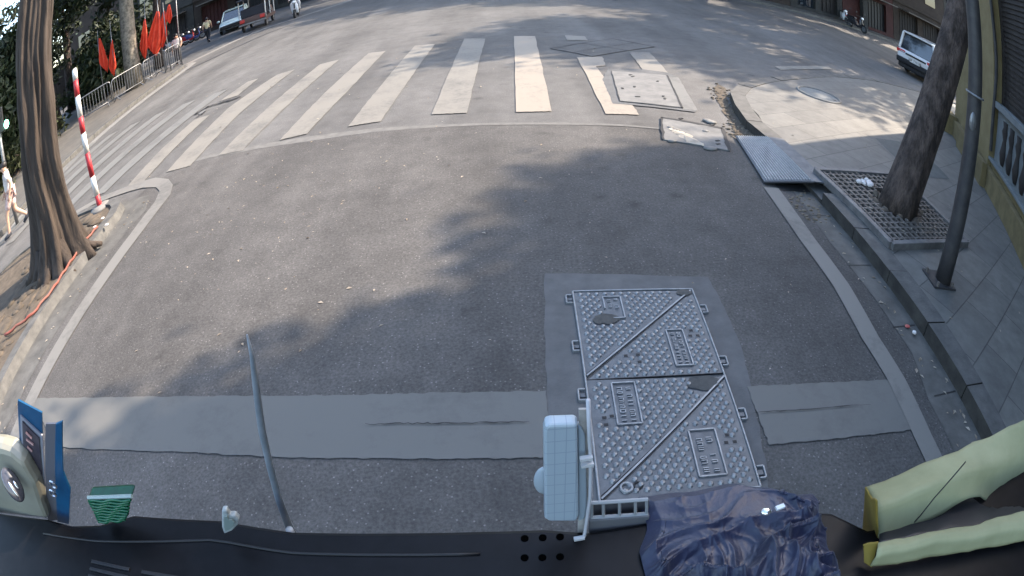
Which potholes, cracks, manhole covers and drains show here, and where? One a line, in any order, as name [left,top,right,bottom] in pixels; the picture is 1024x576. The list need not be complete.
manhole cover [611,71,683,109]
manhole cover [796,85,842,104]
manhole cover [550,39,654,57]
manhole cover [565,288,767,500]
